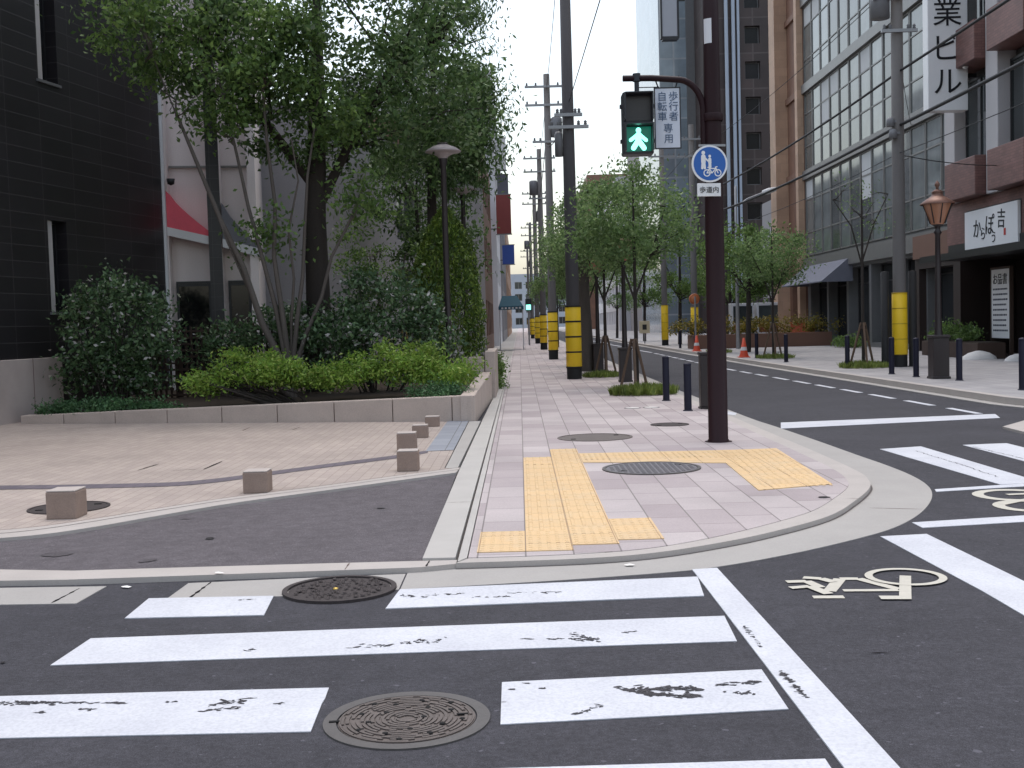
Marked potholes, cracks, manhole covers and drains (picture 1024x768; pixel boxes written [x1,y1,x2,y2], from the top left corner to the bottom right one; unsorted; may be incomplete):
manhole cover [557,433,633,441]
manhole cover [282,575,397,604]
manhole cover [602,461,701,475]
manhole cover [323,691,490,751]
manhole cover [27,501,110,515]
